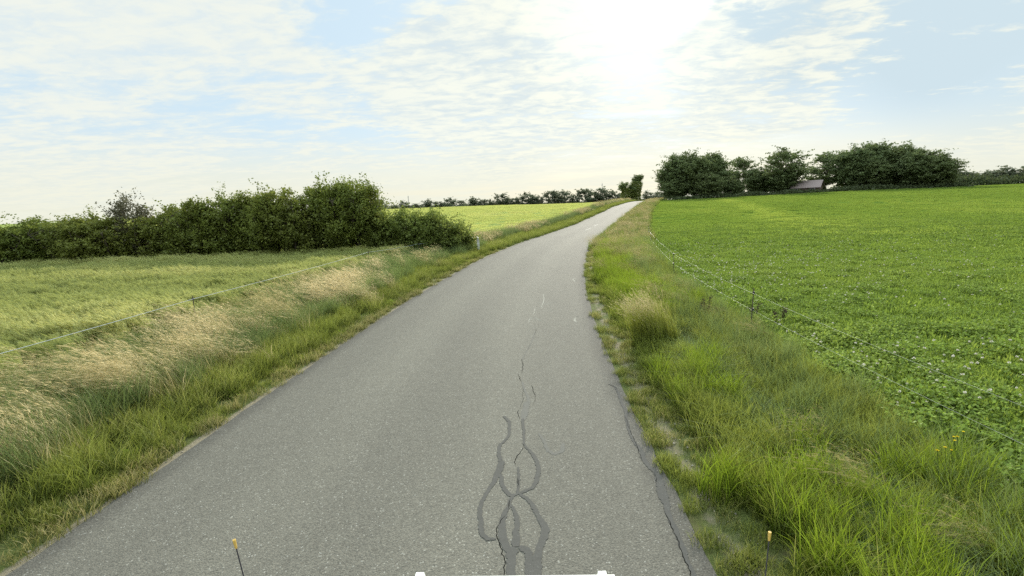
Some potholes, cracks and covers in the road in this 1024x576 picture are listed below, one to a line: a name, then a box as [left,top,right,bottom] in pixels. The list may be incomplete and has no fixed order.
crack [477,294,578,576]
